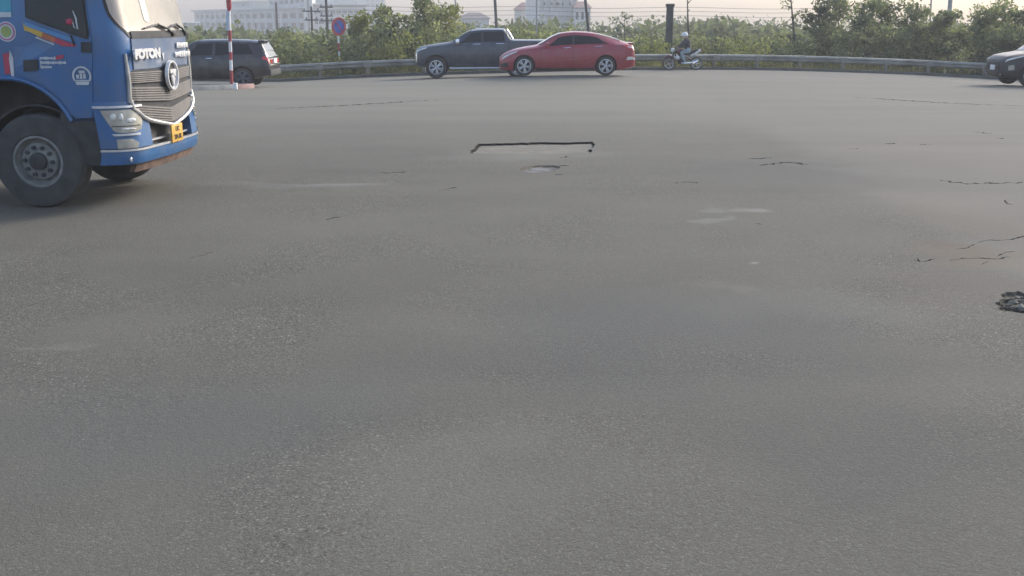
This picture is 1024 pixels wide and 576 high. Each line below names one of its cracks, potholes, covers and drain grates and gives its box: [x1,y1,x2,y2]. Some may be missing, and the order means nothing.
crack [950,236,1023,264]
crack [940,180,1022,204]
crack [856,97,1015,106]
crack [278,100,427,109]
pothole [519,165,560,173]
pothole [995,291,1024,313]
